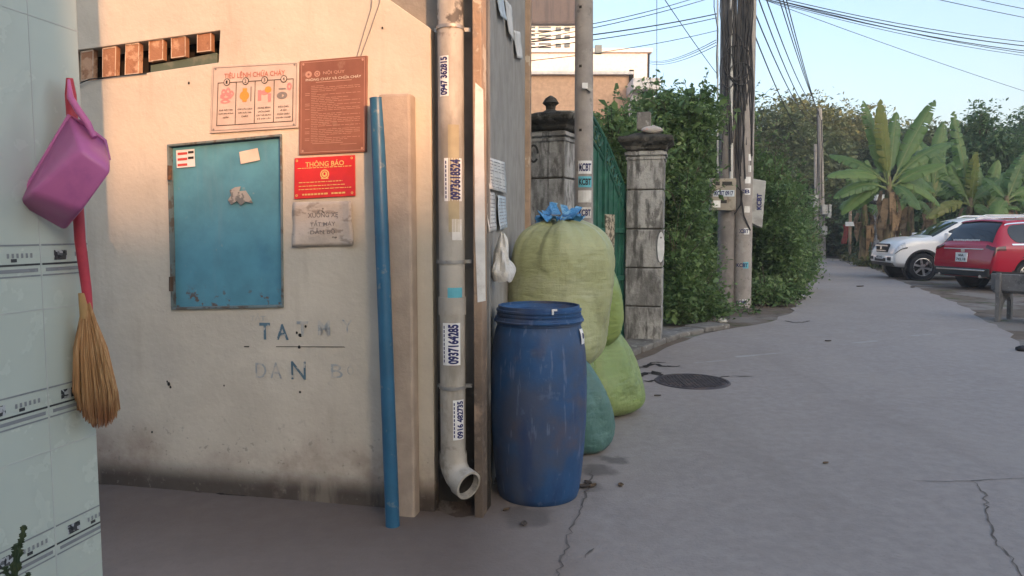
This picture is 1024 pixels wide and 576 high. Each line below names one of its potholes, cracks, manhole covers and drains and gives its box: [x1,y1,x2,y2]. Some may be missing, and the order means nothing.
crack [639,362,677,382]
manhole cover [654,373,731,390]
crack [556,471,594,576]
